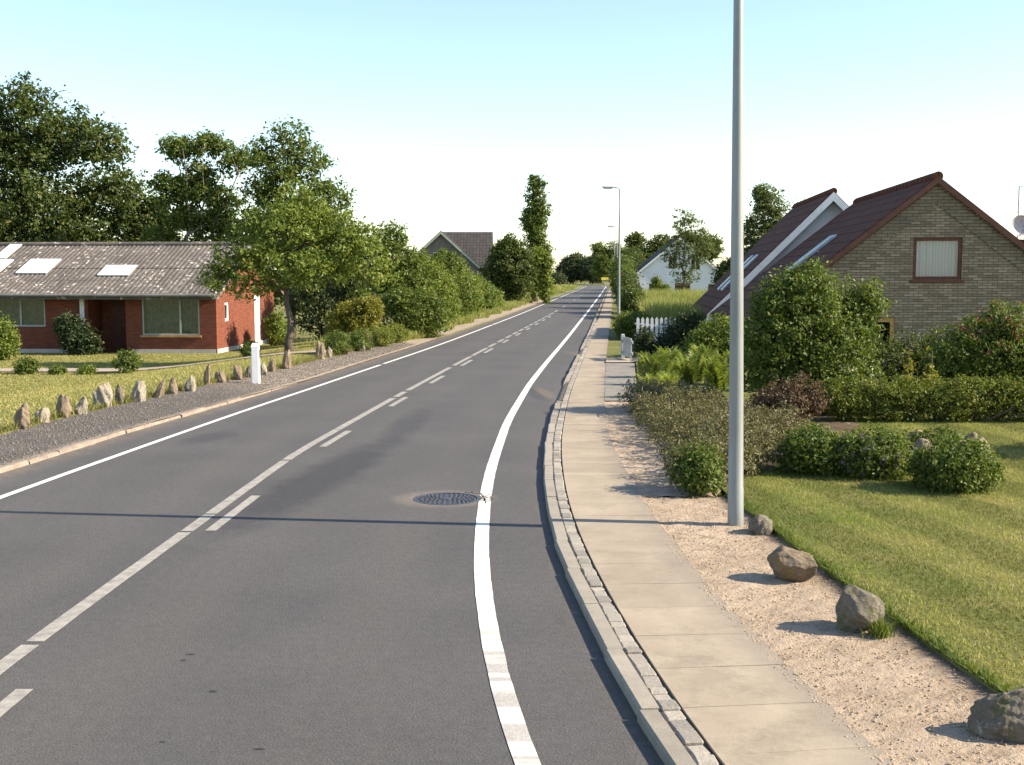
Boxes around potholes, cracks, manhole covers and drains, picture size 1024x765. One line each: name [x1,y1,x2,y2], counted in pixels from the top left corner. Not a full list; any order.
manhole cover [413,492,481,505]
